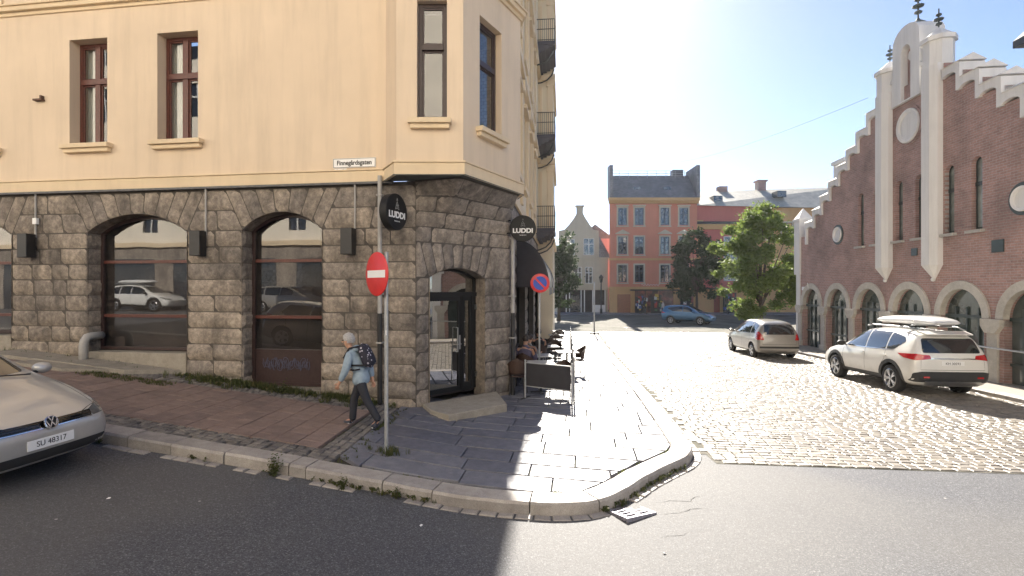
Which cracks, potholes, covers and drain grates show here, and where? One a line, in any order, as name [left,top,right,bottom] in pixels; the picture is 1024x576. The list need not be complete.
drain grate [608,506,657,523]
